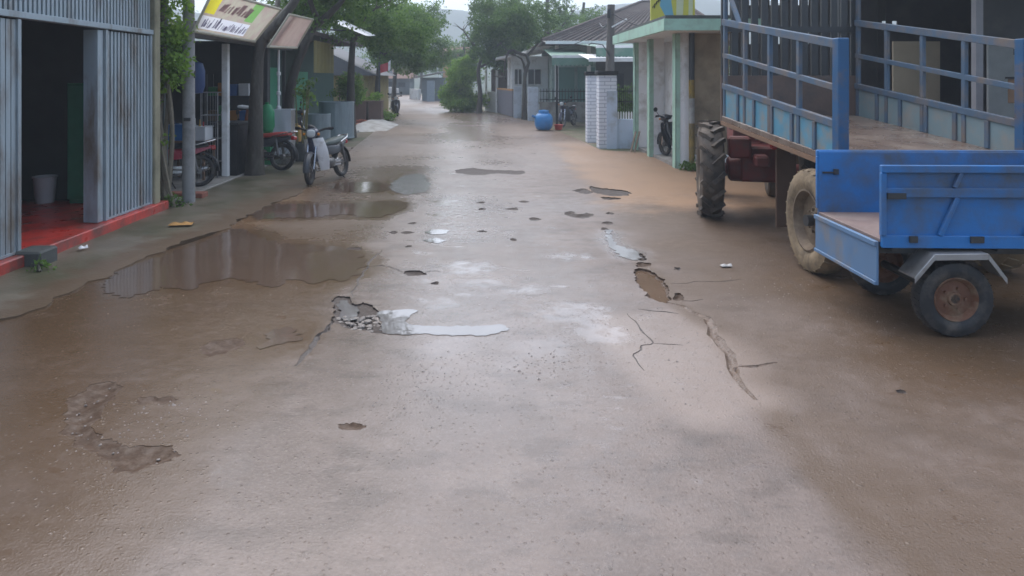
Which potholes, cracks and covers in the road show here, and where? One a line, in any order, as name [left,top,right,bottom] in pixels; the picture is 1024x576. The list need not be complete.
pothole [564,211,594,219]
pothole [590,186,632,196]
pothole [338,422,366,430]
crack [627,279,777,400]
pothole [634,268,672,301]
crack [295,250,431,366]
pothole [331,296,386,334]
